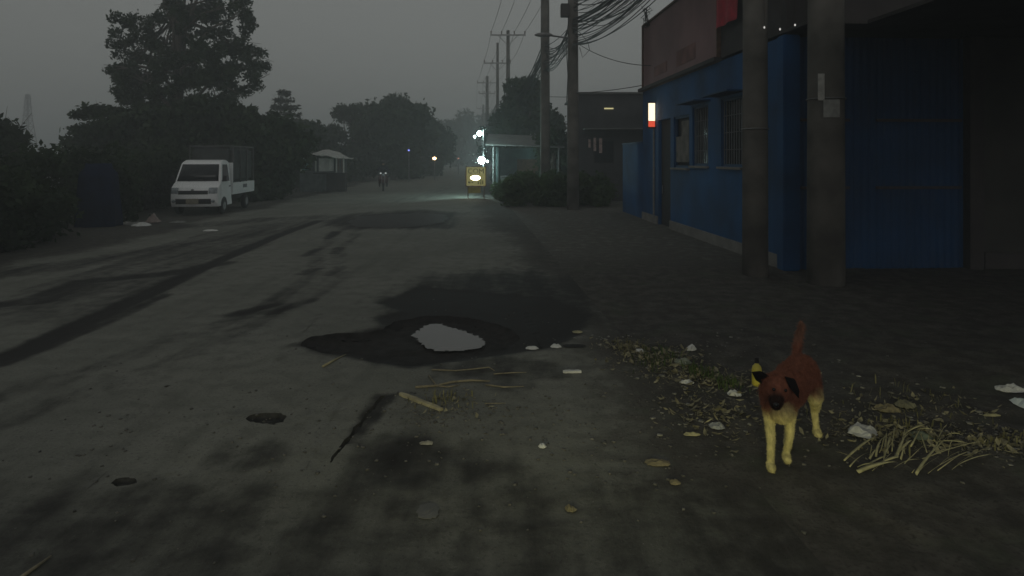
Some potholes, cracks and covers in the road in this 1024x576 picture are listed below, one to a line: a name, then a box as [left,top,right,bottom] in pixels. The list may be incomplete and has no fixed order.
pothole [111,477,137,486]
crack [330,396,387,462]
pothole [246,413,287,425]
pothole [301,316,520,366]
